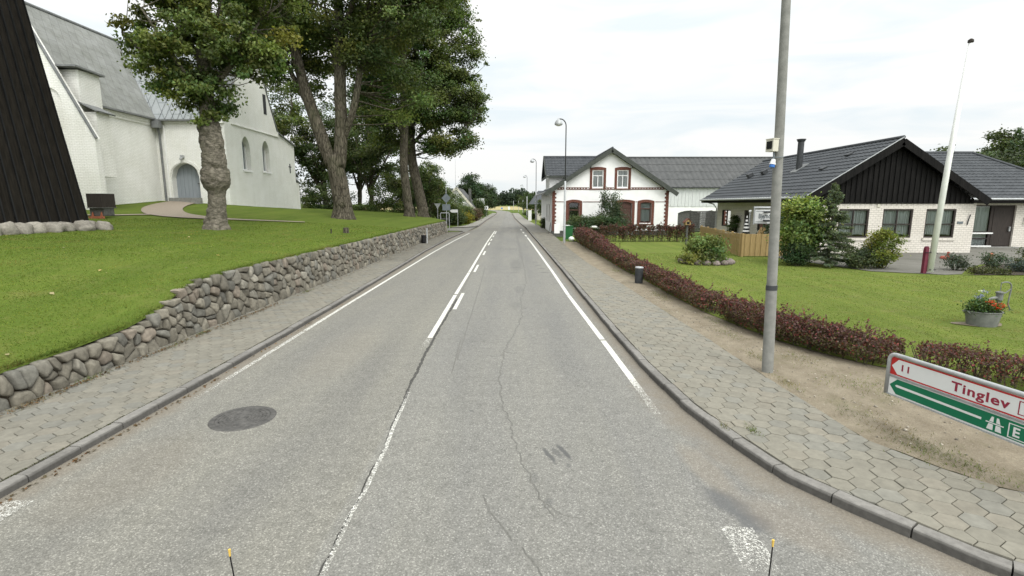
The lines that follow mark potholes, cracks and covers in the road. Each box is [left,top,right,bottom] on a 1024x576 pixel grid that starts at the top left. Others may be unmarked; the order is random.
manhole cover [208,406,277,432]
crack [318,257,580,576]
